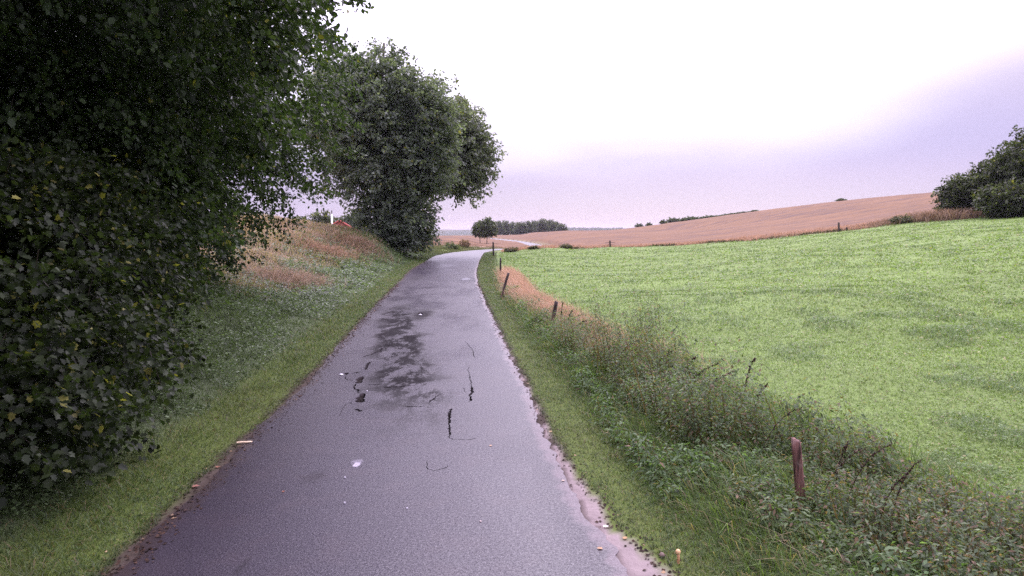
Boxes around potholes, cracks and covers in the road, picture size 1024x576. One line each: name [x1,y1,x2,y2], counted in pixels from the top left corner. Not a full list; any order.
crack [406,343,474,440]
